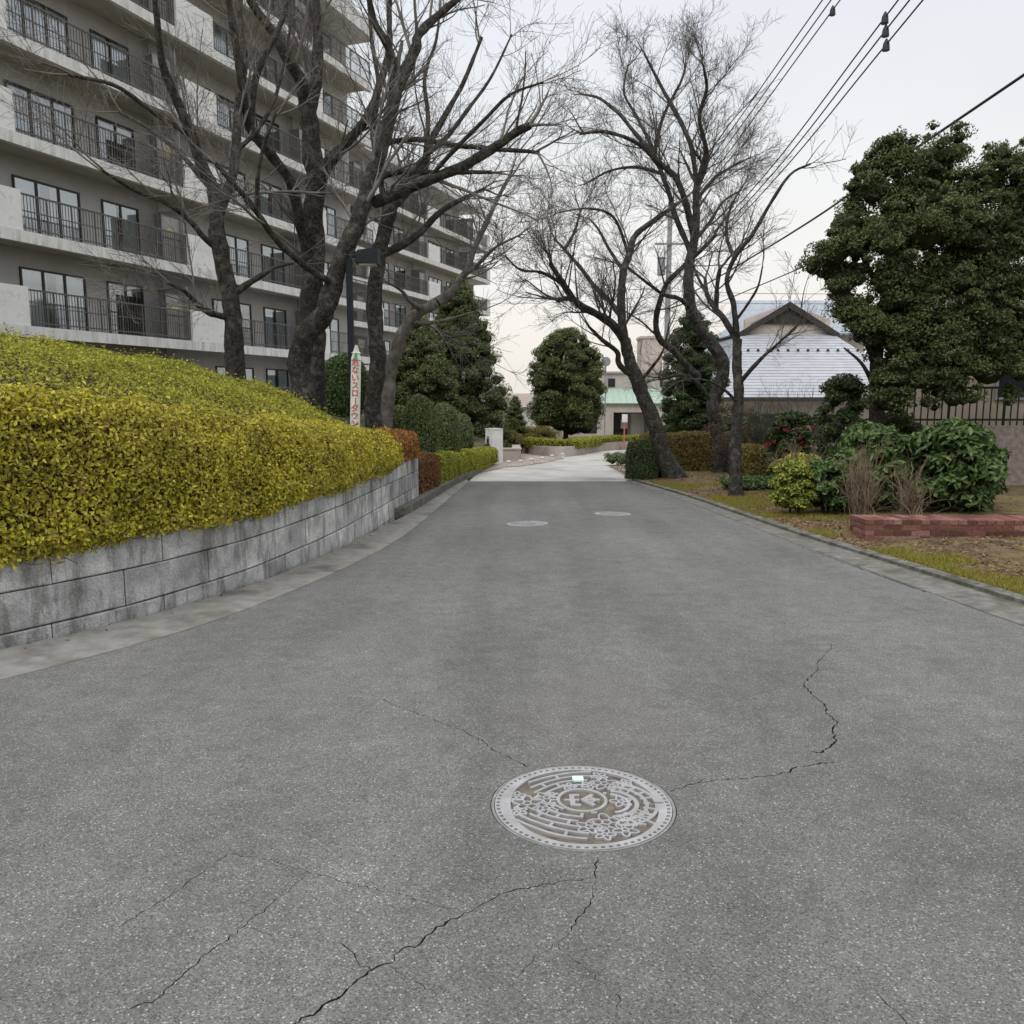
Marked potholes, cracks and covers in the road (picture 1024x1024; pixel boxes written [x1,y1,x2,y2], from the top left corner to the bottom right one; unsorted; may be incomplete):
crack [124,858,621,1024]
manhole cover [491,765,676,852]
crack [673,645,838,791]
